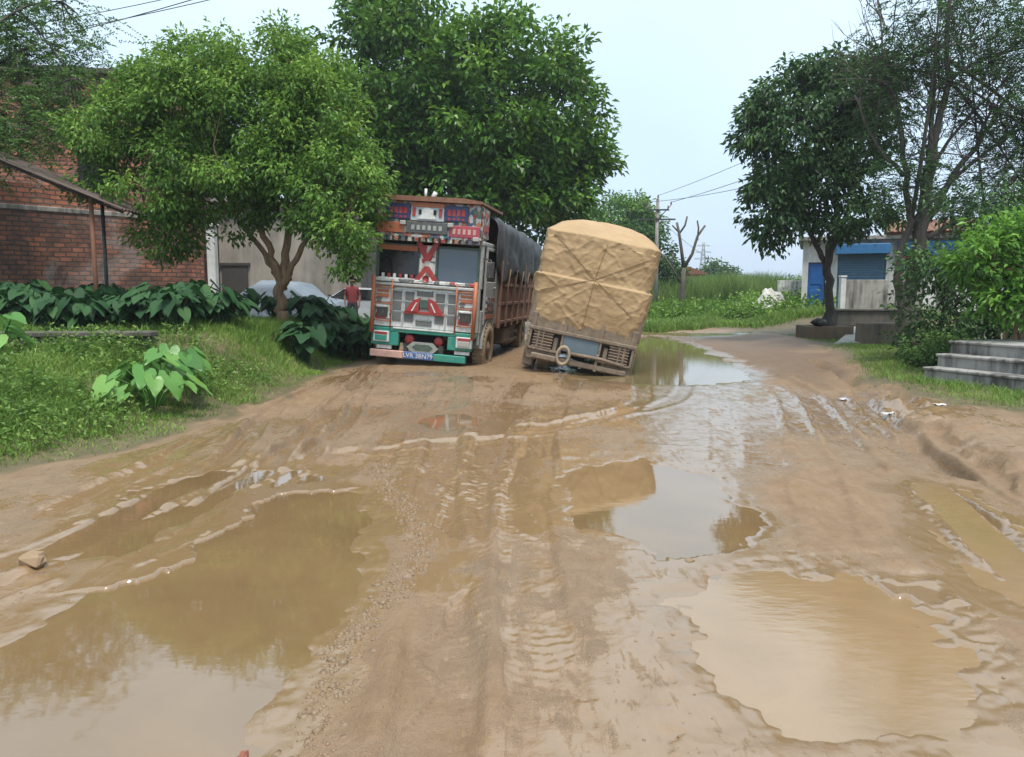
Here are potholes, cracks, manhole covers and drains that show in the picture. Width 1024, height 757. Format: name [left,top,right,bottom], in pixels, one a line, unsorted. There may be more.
pothole [648,551,1024,757]
pothole [408,411,493,433]
pothole [12,461,356,563]
pothole [0,480,399,757]
pothole [560,335,770,386]
pothole [540,453,780,581]
pothole [882,478,1024,619]
